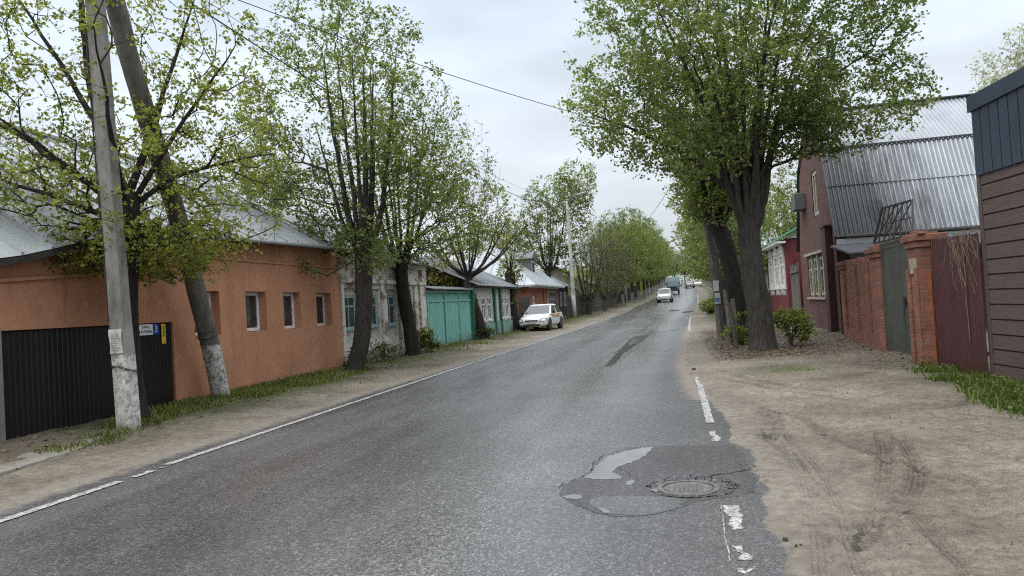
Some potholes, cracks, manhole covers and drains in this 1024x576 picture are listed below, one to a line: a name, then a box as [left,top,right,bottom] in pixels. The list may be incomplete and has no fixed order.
manhole cover [657,480,720,496]
